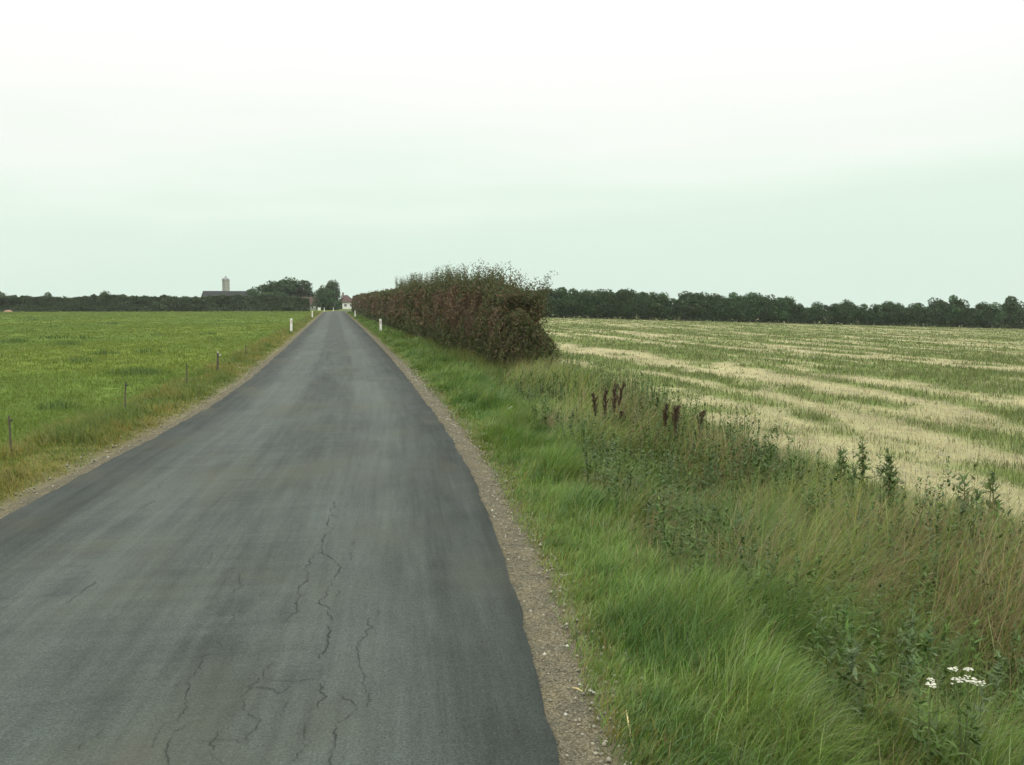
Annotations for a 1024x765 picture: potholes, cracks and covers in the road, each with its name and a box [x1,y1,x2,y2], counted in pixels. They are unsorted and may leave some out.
crack [152,573,263,765]
crack [283,501,355,658]
crack [241,602,379,765]
